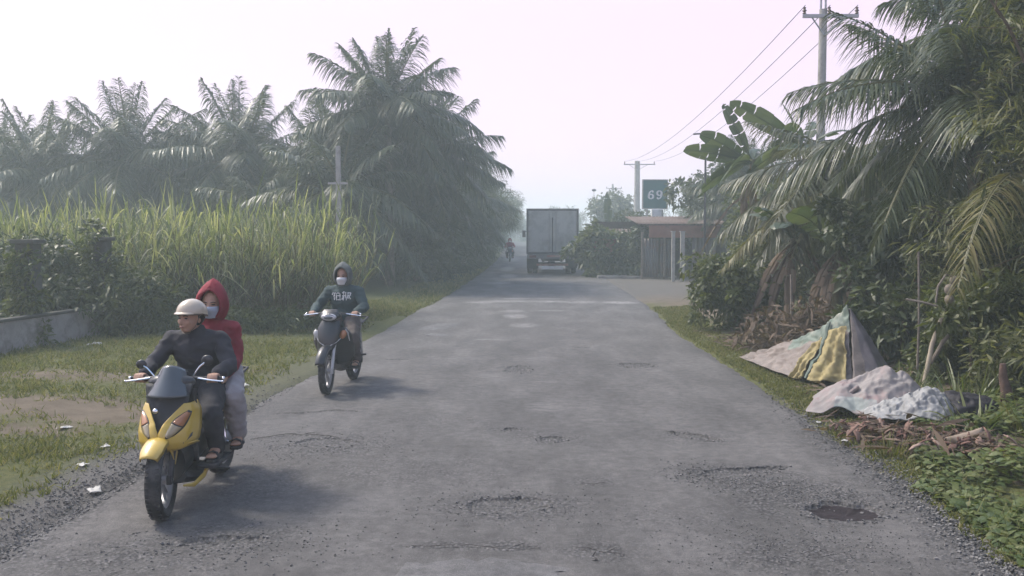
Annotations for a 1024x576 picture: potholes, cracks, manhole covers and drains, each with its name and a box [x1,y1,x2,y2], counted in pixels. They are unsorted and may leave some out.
pothole [663,430,727,442]
pothole [289,436,368,448]
pothole [455,495,561,514]
pothole [680,465,792,478]
pothole [502,365,534,374]
pothole [792,500,902,524]
